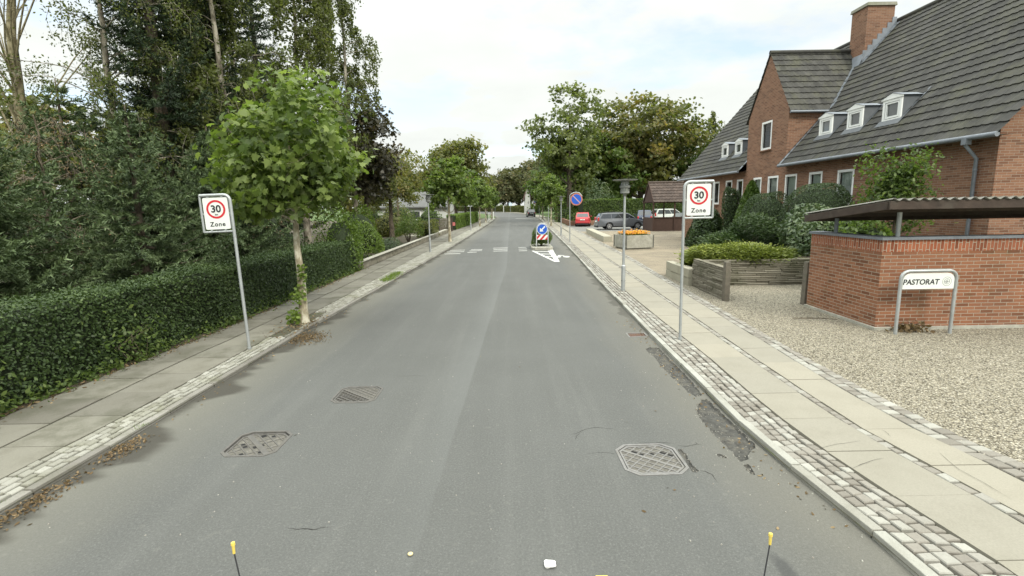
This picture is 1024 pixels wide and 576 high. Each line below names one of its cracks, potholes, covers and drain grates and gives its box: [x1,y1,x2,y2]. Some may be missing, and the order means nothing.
manhole cover [220,430,293,457]
manhole cover [615,443,689,476]
pothole [696,399,758,462]
pothole [646,347,702,397]
